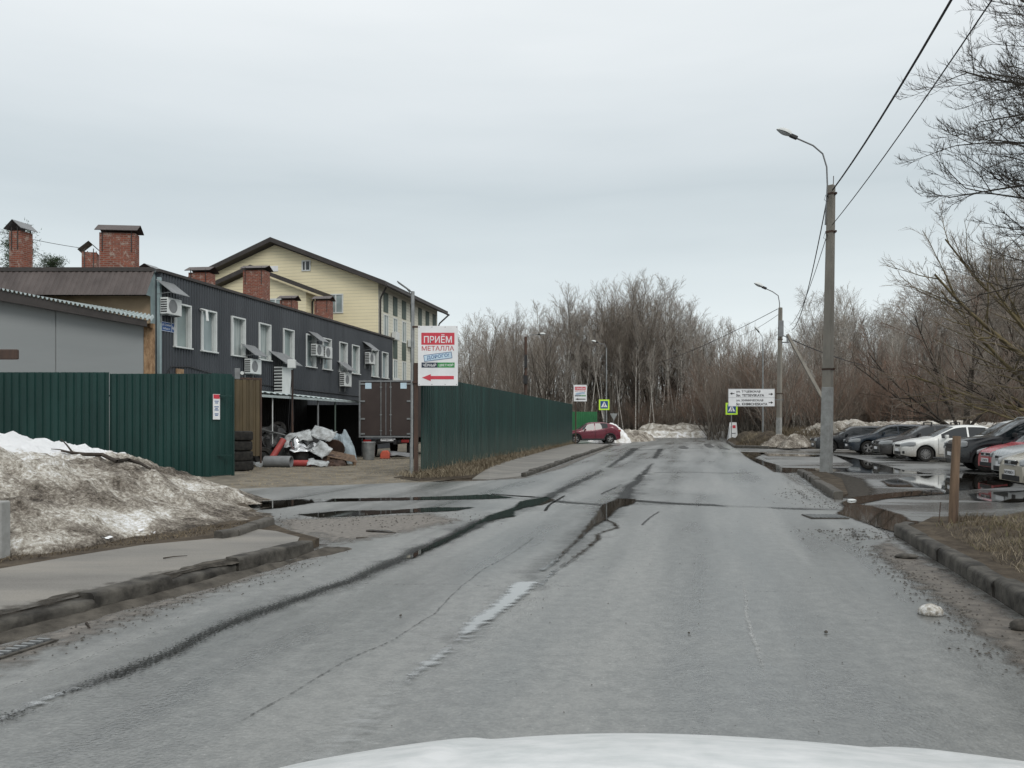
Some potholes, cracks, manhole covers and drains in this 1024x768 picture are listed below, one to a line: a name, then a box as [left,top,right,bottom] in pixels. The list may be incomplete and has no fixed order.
drain grate [0,637,59,659]
